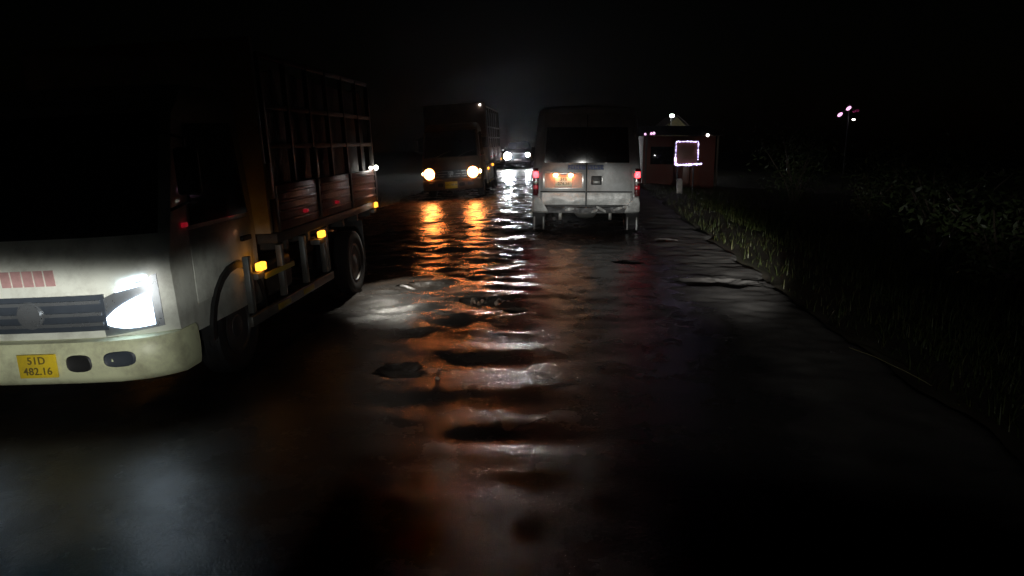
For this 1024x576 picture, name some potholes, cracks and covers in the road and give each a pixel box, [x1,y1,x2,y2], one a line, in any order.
pothole [458,296,510,307]
pothole [372,361,426,380]
pothole [394,281,449,292]
pothole [670,277,774,289]
